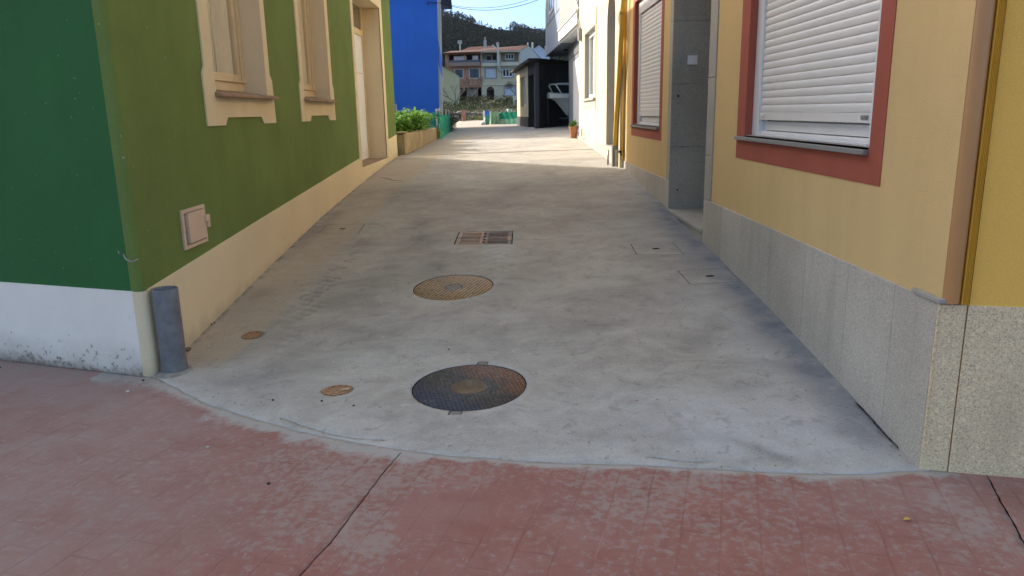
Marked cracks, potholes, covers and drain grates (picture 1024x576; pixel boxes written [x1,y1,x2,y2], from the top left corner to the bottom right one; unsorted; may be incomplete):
drain grate [454,231,513,245]
utility cover [631,243,684,255]
crack [300,452,402,576]
crack [988,478,1024,543]
utility cover [242,331,263,339]
crack [855,402,899,449]
utility cover [679,268,740,285]
manhole cover [413,275,493,300]
manhole cover [412,362,527,415]
utility cover [322,385,352,396]
